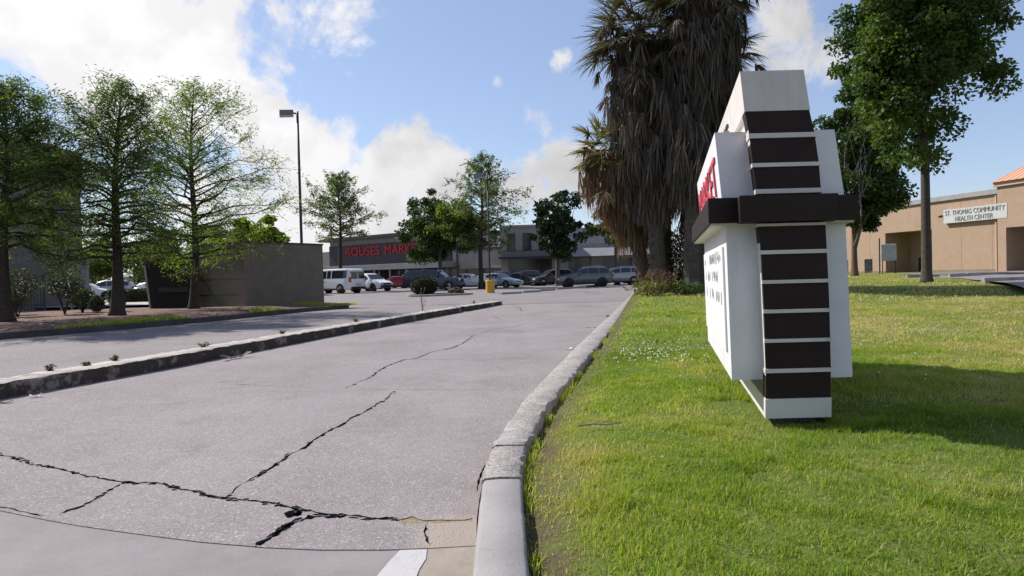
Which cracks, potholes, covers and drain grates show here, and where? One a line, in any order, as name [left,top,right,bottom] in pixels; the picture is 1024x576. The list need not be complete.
crack [0,306,522,548]
